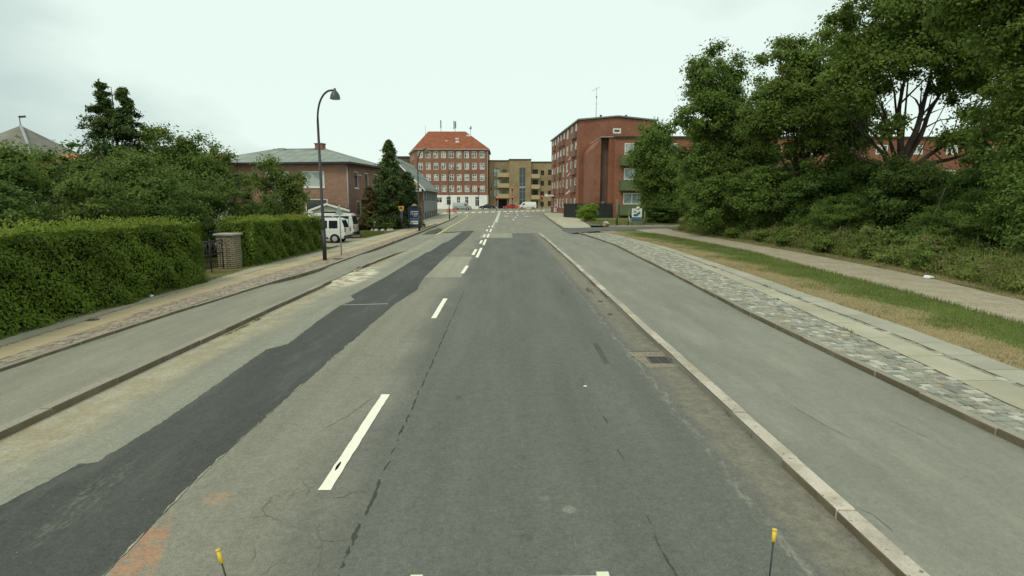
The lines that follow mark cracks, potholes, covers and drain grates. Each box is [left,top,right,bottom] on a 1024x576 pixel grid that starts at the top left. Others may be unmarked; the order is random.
crack [233,477,368,576]
drain grate [645,356,674,364]
